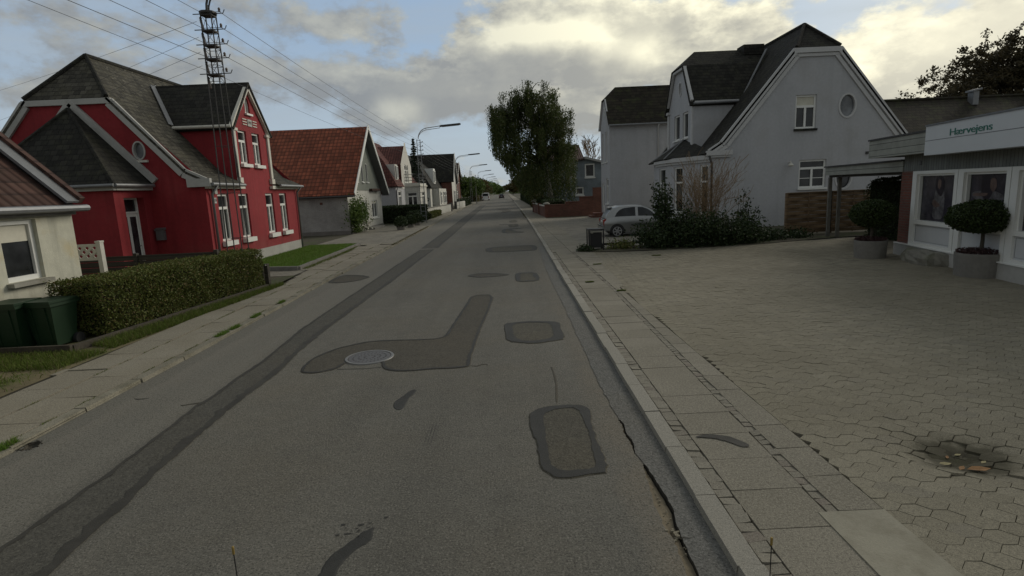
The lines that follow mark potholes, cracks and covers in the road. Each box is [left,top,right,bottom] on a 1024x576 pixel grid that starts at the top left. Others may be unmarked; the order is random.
manhole cover [345,350,394,365]
pothole [16,440,43,452]
pothole [928,449,993,471]
crack [618,420,699,576]
